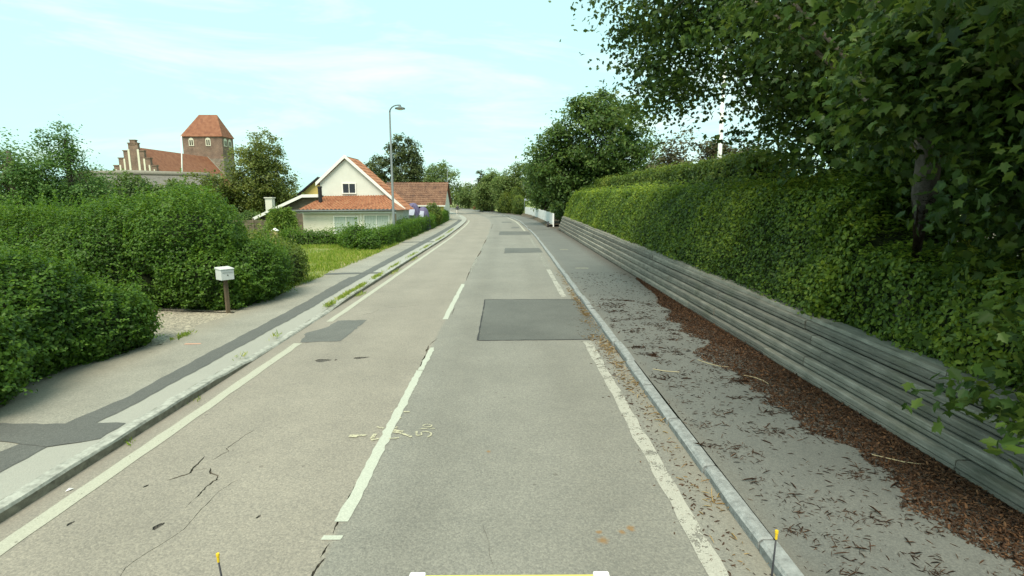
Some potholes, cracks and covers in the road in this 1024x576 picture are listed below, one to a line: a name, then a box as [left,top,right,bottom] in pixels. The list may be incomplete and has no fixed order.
crack [121,431,252,575]
